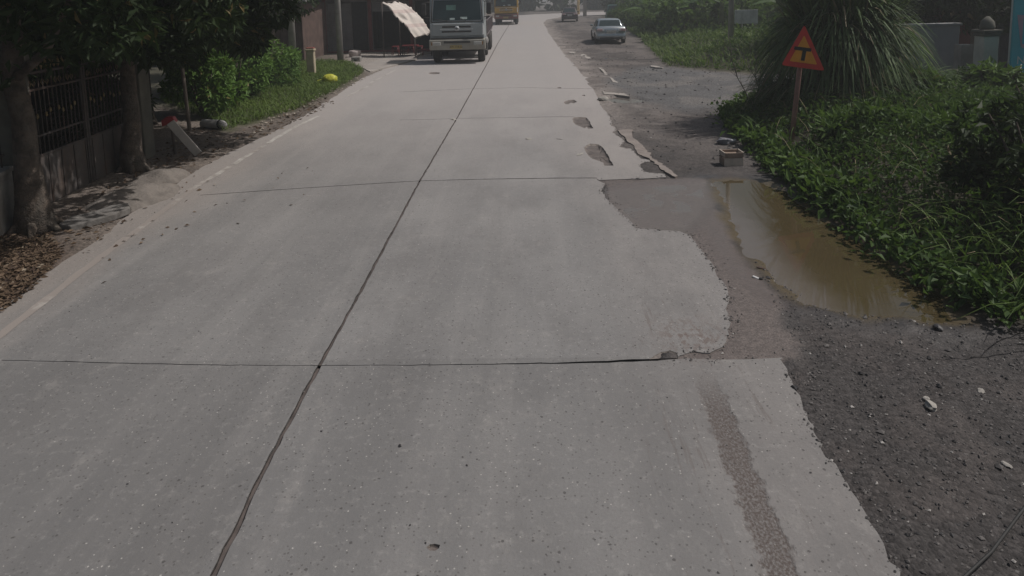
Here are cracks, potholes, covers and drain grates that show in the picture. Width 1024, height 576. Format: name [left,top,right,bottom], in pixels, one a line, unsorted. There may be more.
pothole [573,117,593,129]
pothole [585,144,613,166]
